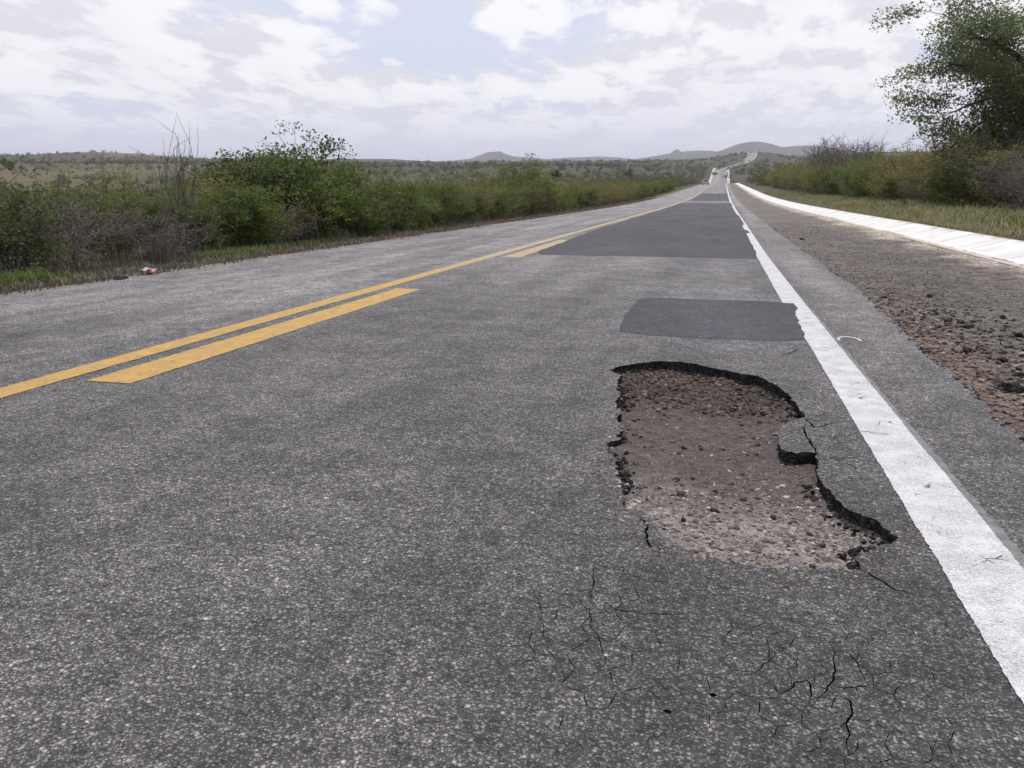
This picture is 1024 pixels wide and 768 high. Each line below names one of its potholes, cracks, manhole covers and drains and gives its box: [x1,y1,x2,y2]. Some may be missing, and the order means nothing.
crack [505,553,690,730]
crack [860,569,954,641]
crack [677,598,975,768]
pothole [578,358,926,601]
